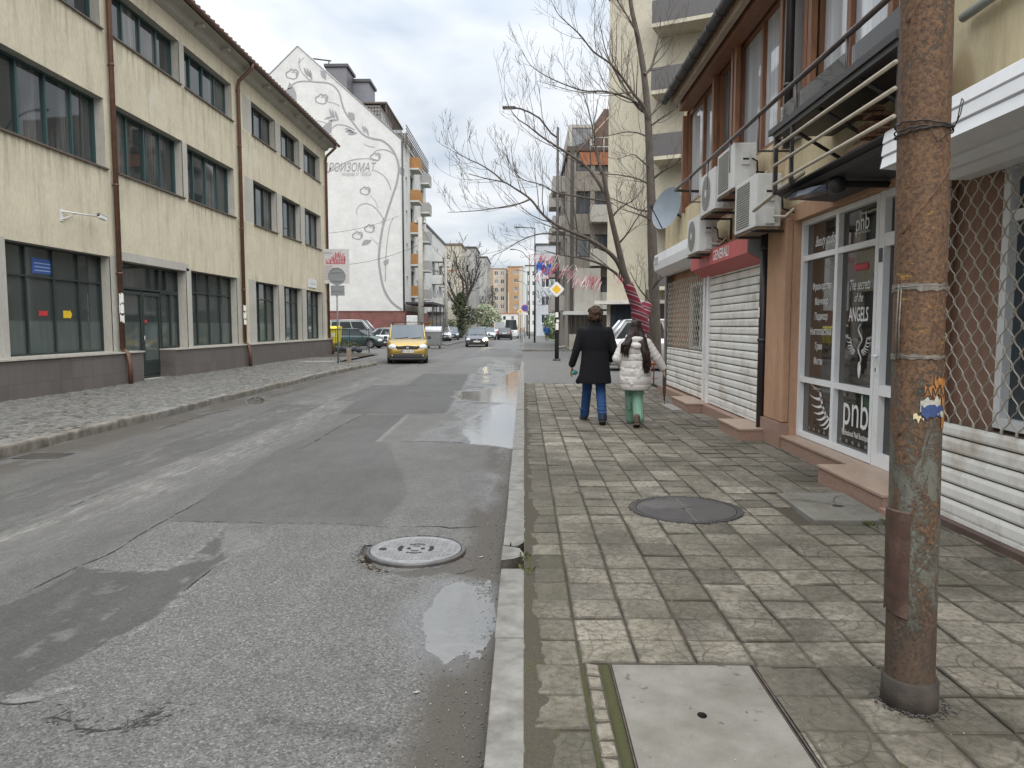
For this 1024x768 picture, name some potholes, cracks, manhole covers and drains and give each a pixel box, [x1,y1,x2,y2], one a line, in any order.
crack [0,701,191,738]
manhole cover [365,536,466,568]
utility cover [610,663,823,768]
manhole cover [630,496,743,524]
